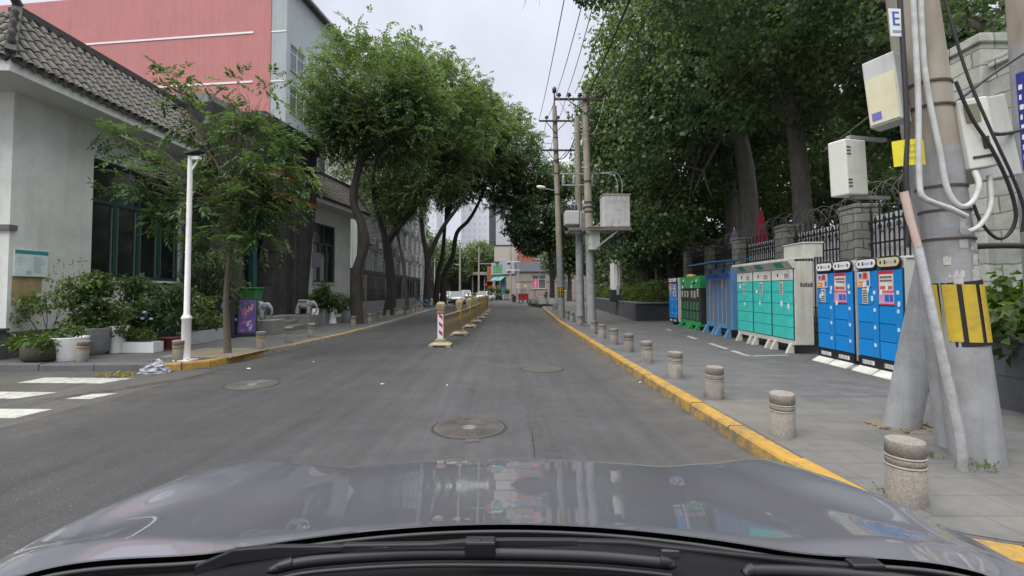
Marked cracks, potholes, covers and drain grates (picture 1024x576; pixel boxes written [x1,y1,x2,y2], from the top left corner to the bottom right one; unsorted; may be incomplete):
manhole cover [520,365,564,373]
manhole cover [431,417,508,442]
manhole cover [221,379,281,390]
